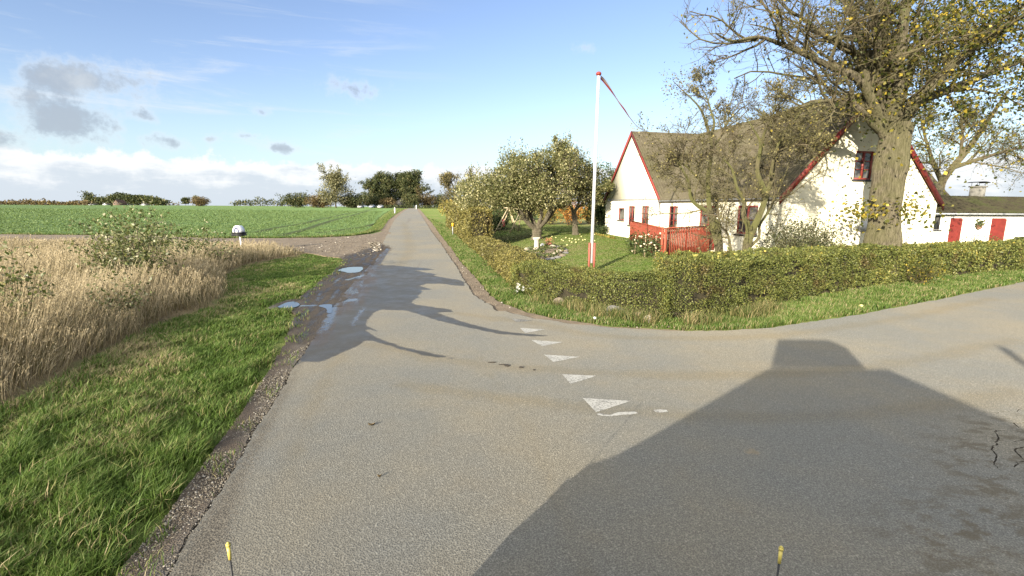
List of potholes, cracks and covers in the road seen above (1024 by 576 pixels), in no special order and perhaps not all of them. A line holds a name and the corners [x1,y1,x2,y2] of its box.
crack [991,410,1024,468]
